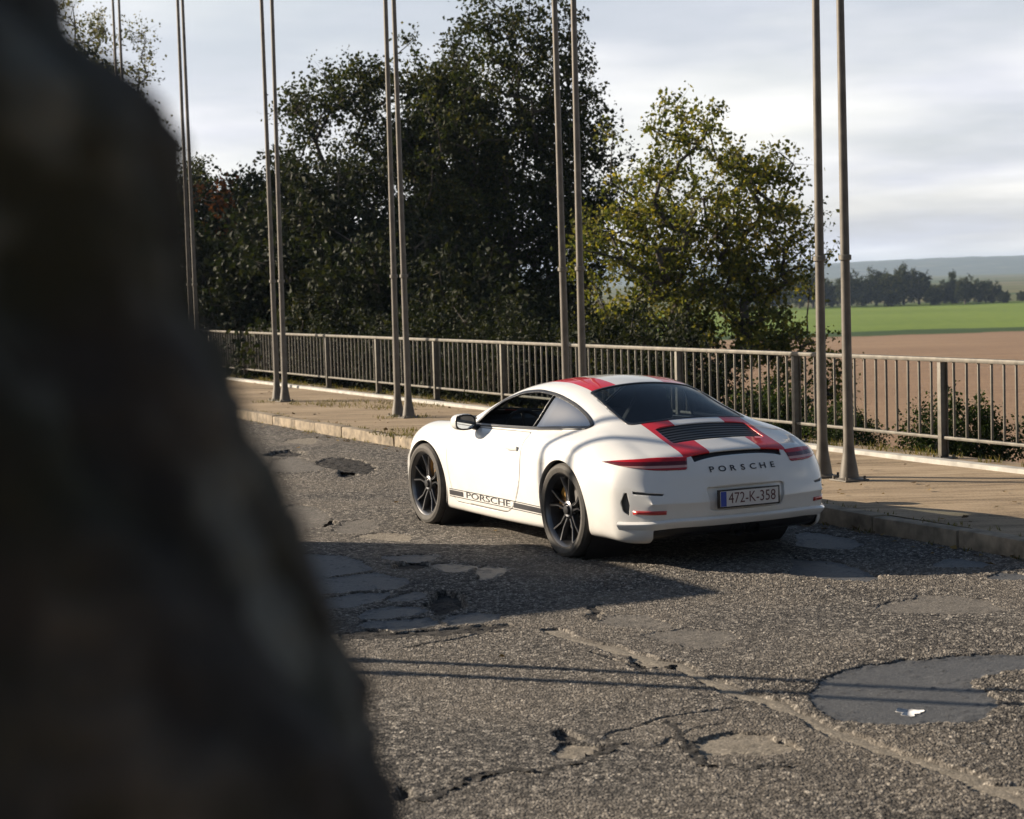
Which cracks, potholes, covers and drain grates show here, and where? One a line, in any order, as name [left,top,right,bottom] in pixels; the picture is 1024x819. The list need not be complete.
crack [416,631,1024,809]
pothole [429,596,464,615]
pothole [315,457,377,475]
